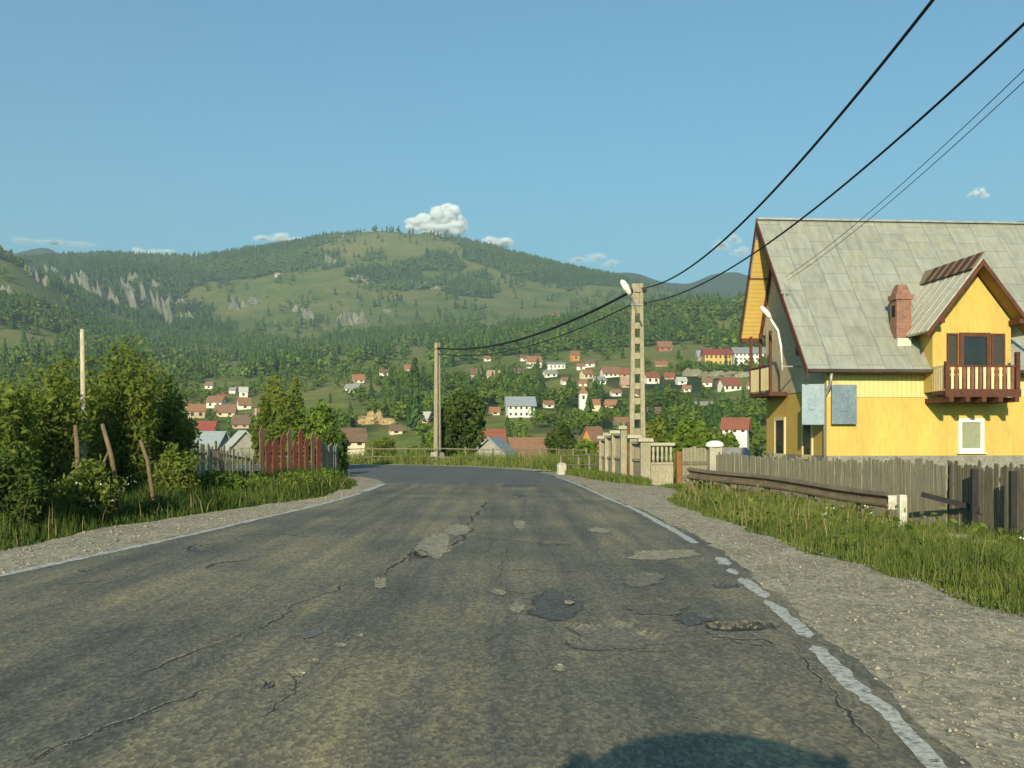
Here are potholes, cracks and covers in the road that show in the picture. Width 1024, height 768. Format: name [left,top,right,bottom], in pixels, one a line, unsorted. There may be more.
crack [383,496,584,594]
crack [185,544,247,568]
pothole [704,621,778,632]
crack [23,583,345,766]
crack [702,630,883,758]
